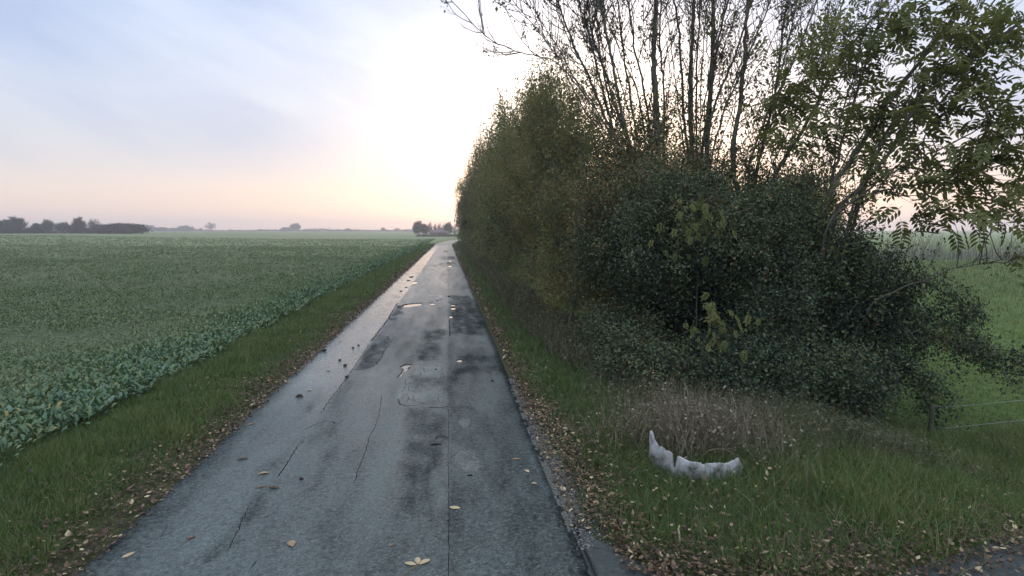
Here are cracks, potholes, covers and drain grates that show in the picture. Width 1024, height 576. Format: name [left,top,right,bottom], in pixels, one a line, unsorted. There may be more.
crack [353,365,450,576]
crack [305,295,461,430]
